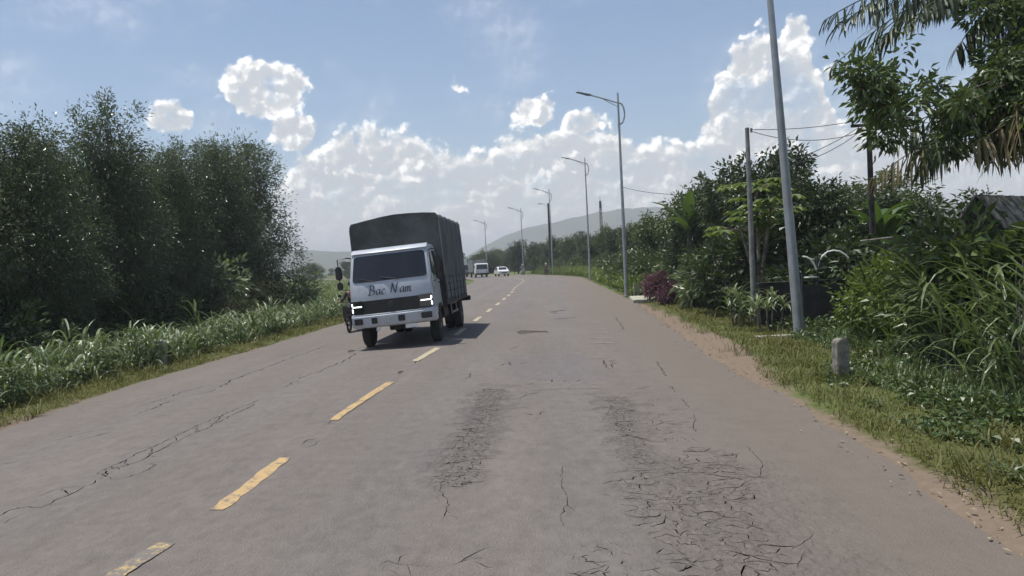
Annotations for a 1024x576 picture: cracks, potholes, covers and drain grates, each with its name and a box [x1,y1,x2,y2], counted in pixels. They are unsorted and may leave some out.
crack [0,400,258,537]
crack [399,358,814,576]
crack [55,345,356,441]
